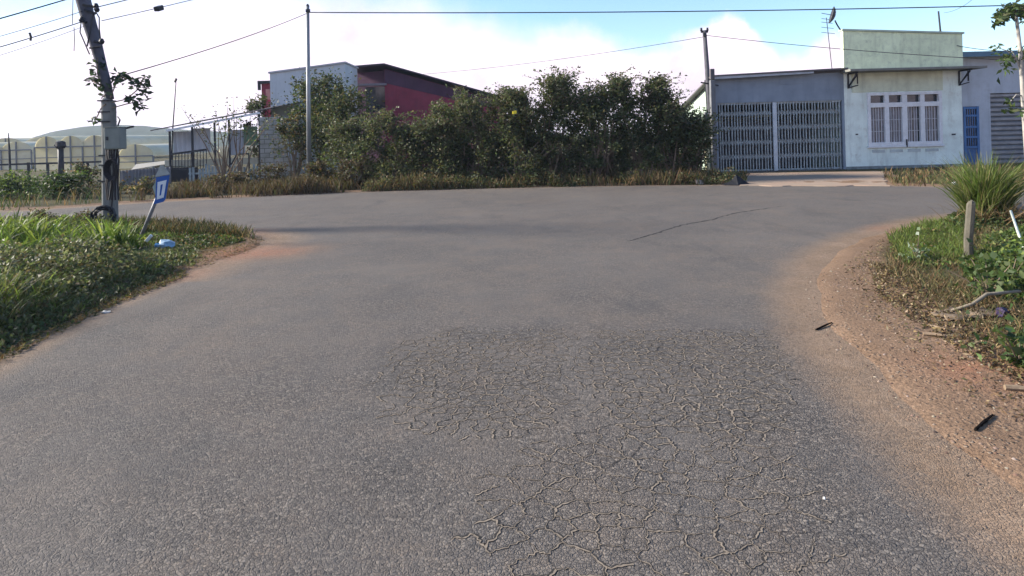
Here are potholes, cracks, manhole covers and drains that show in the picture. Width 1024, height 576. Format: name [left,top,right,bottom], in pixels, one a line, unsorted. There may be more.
crack [363,326,846,576]
crack [630,206,781,241]
